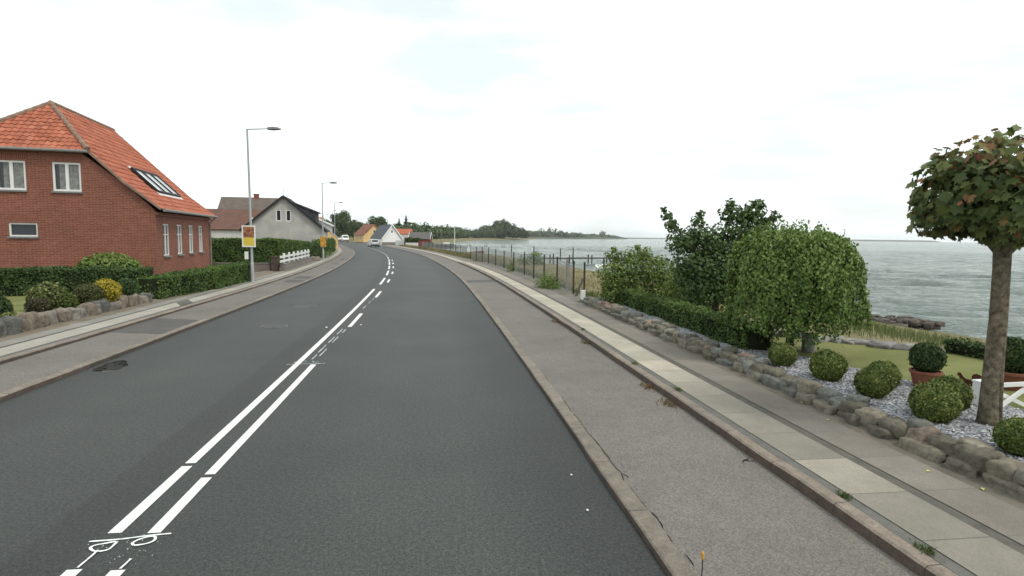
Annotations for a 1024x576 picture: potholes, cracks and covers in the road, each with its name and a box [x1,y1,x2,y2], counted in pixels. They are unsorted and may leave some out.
pothole [92,360,128,372]
